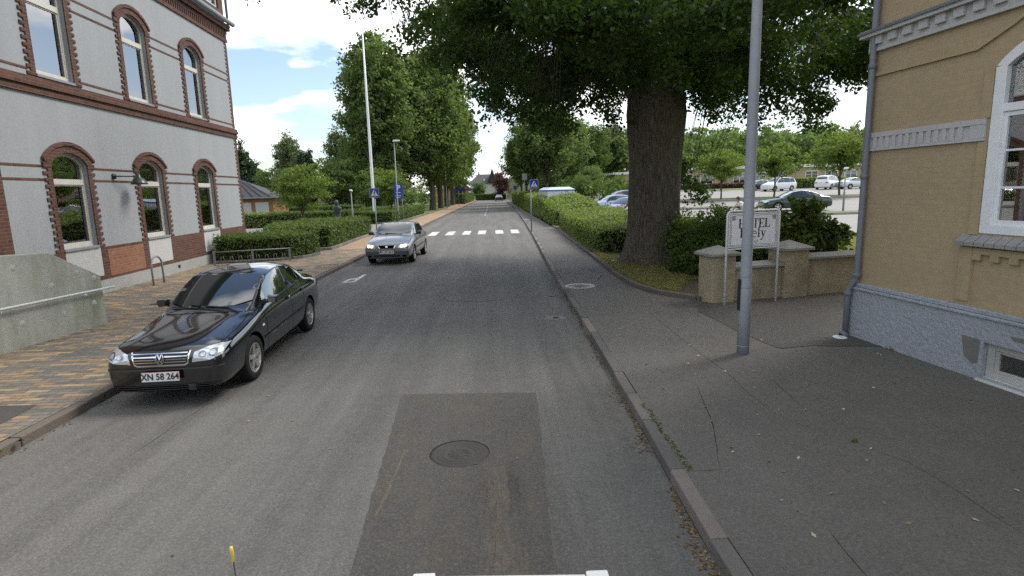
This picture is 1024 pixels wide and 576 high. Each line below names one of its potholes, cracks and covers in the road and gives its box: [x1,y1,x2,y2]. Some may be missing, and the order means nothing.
crack [680,380,720,471]
manhole cover [430,440,490,467]
crack [365,443,411,540]
